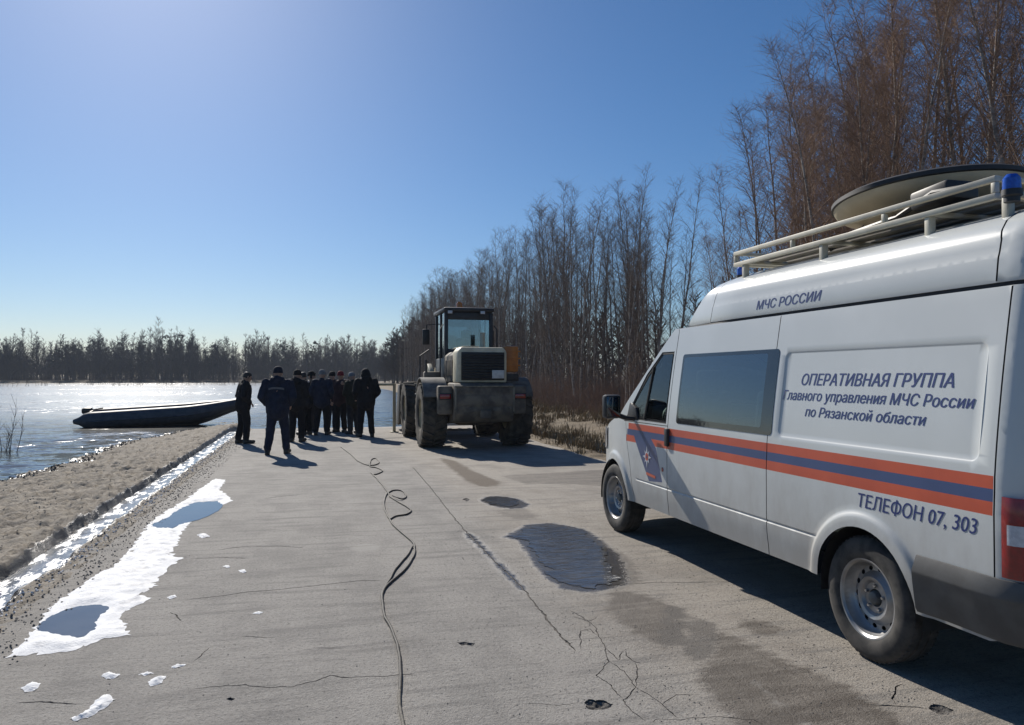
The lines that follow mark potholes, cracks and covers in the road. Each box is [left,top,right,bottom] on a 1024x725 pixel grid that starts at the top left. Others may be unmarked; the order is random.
pothole [929,704,953,715]
crack [192,674,414,701]
crack [189,580,382,600]
crack [878,684,927,709]
crack [415,470,760,723]
pothole [584,699,613,710]
